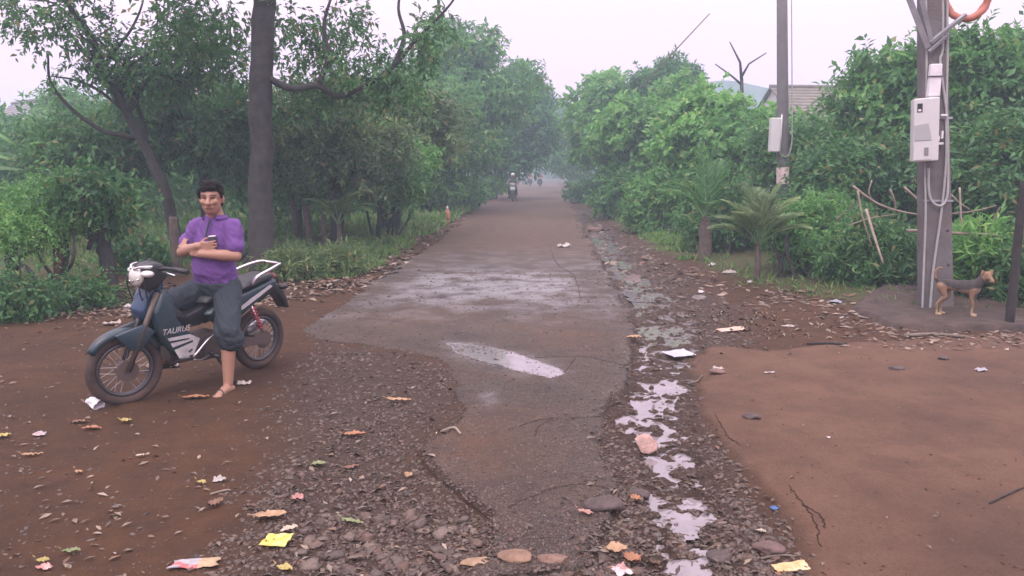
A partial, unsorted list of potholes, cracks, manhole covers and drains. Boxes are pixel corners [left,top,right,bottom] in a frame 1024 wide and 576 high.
crack [788,485,826,547]
crack [715,415,741,446]
crack [505,483,619,508]
crack [508,415,604,437]
pothole [446,342,567,379]
crack [535,356,634,373]
crack [549,244,582,302]
